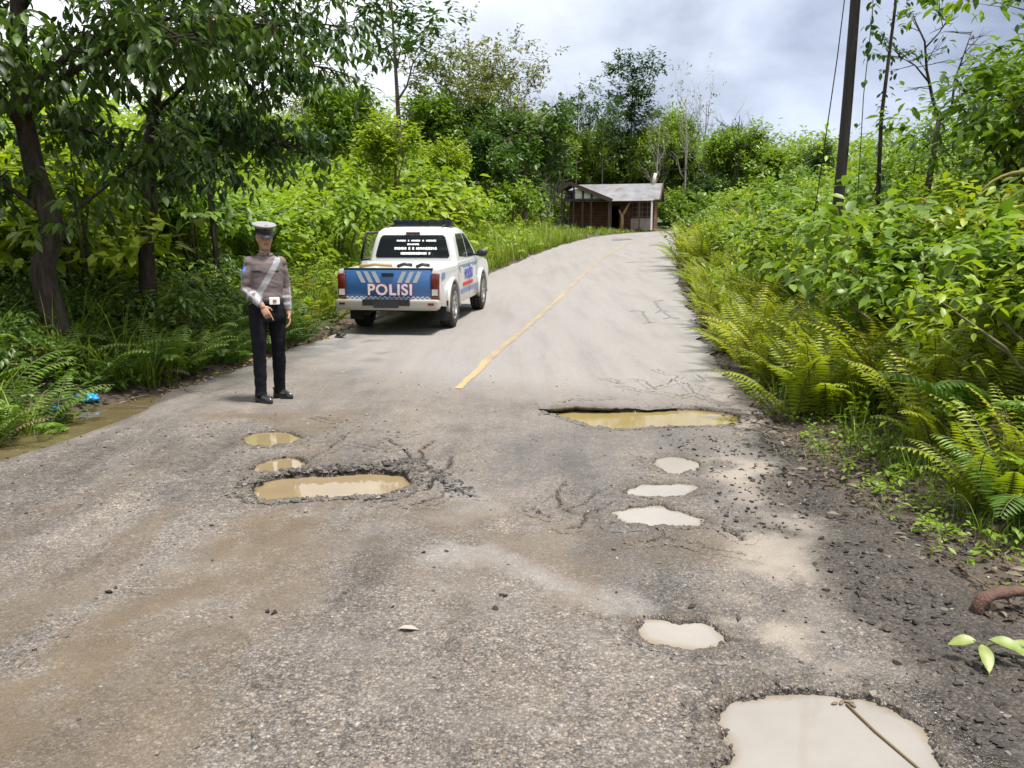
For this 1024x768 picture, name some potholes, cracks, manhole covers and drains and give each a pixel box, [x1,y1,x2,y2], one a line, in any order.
pothole [685,672,981,768]
pothole [600,499,722,530]
crack [307,415,496,510]
pothole [233,464,423,504]
pothole [237,452,317,475]
pothole [538,401,750,430]
crack [555,369,780,426]
pothole [639,452,715,476]
pothole [613,478,707,502]
pothole [228,428,313,449]
crack [521,478,764,561]
pothole [617,607,751,658]
